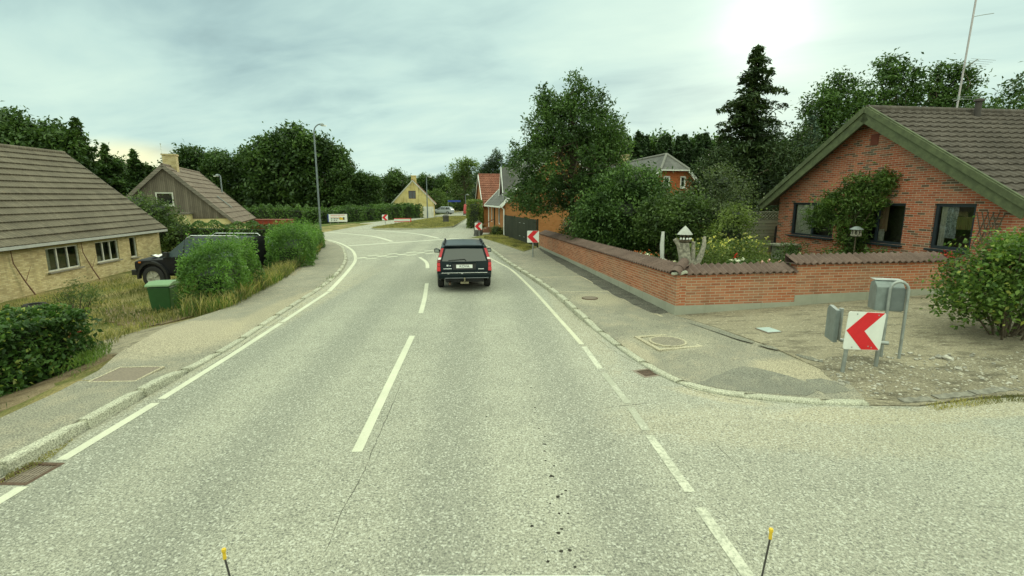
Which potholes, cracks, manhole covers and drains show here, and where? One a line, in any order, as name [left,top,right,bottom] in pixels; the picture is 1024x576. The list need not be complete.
drain grate [632,368,661,378]
manhole cover [634,334,702,351]
manhole cover [88,366,165,382]
drain grate [0,462,65,486]
